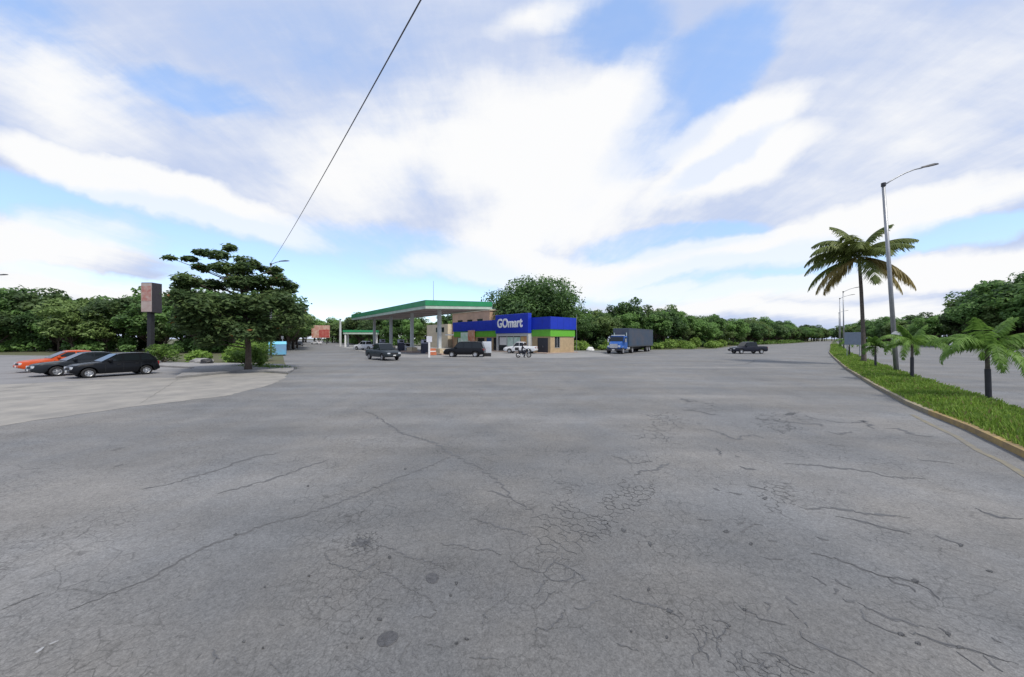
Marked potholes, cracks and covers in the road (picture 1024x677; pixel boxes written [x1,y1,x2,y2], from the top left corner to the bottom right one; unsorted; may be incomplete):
crack [324,537,1018,673]
crack [680,398,933,495]
